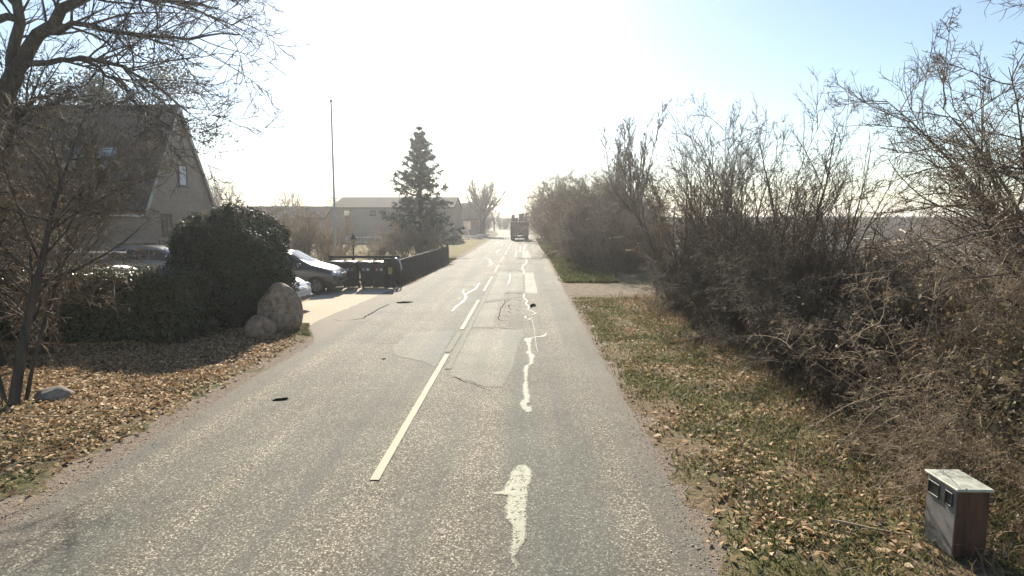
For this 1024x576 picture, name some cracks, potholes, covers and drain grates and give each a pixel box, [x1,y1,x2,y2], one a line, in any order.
crack [487,293,521,329]
